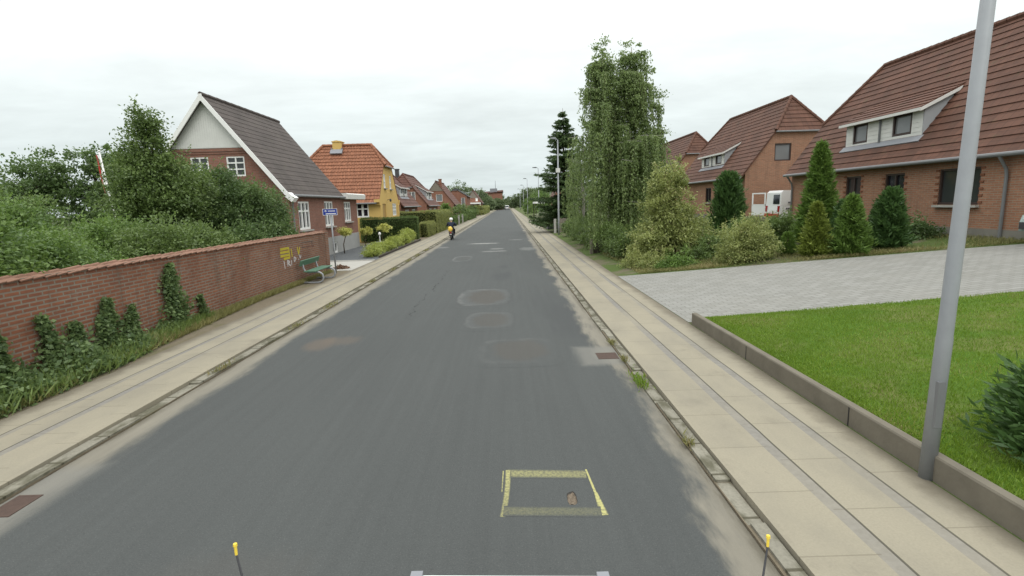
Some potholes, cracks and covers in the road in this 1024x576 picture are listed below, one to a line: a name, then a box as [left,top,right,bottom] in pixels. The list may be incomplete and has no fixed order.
pothole [567,491,578,505]
